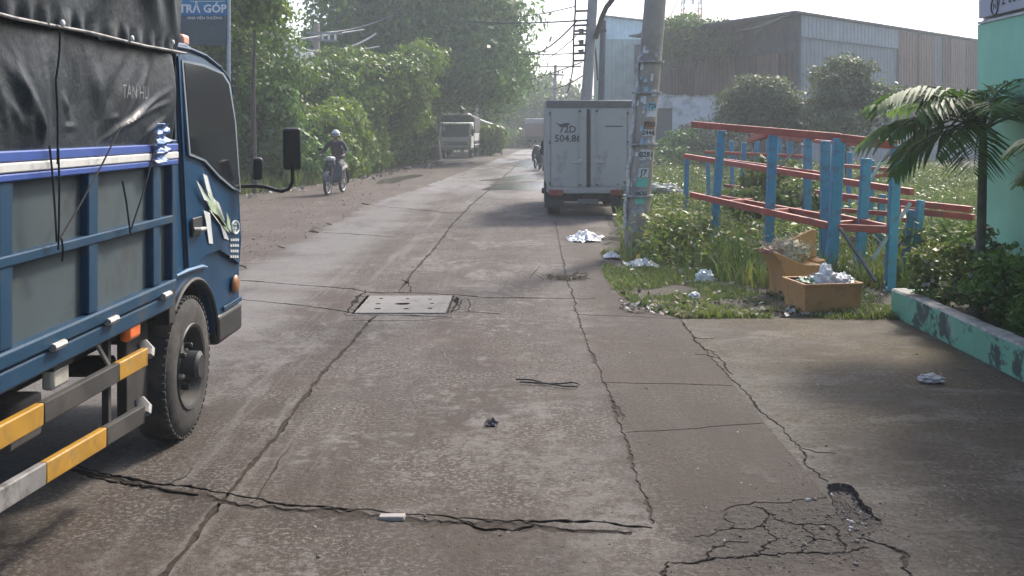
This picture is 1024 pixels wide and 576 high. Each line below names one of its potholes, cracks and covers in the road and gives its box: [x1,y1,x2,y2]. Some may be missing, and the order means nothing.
crack [659,497,913,576]
crack [71,164,837,576]
pothole [827,483,883,539]
manhole cover [354,296,453,314]
